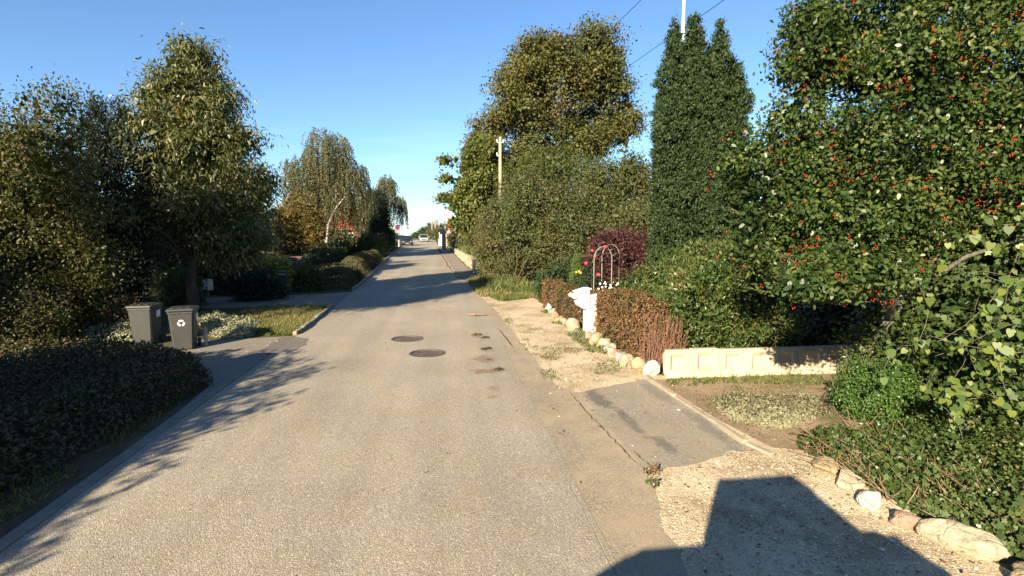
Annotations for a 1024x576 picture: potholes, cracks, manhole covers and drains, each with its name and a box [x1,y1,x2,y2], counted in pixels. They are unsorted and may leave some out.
crack [572,395,651,467]
manhole cover [409,349,446,357]
